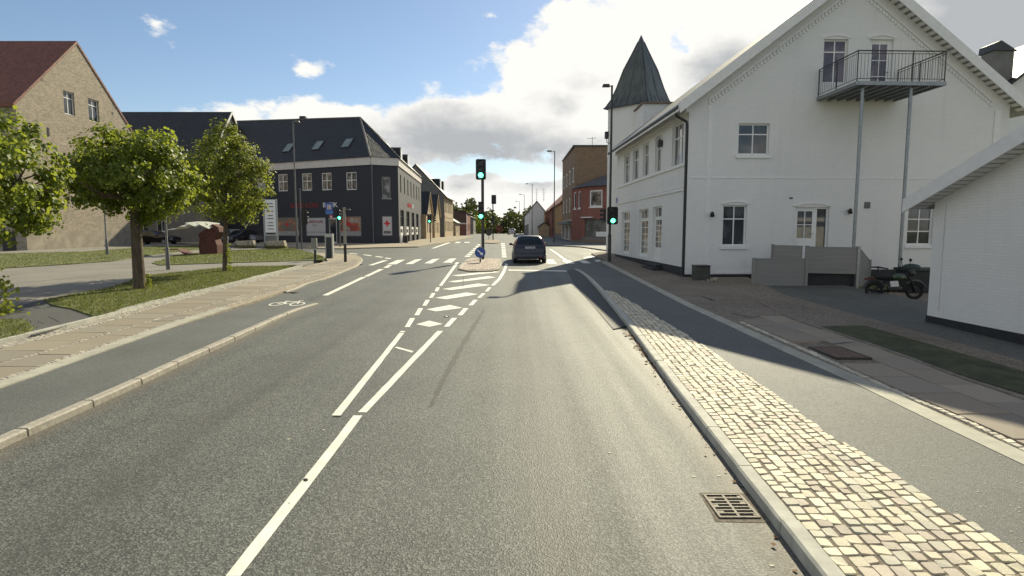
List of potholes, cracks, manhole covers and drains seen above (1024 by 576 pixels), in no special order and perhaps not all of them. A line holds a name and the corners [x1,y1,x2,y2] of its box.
drain grate [699,493,771,523]
manhole cover [808,347,872,360]
